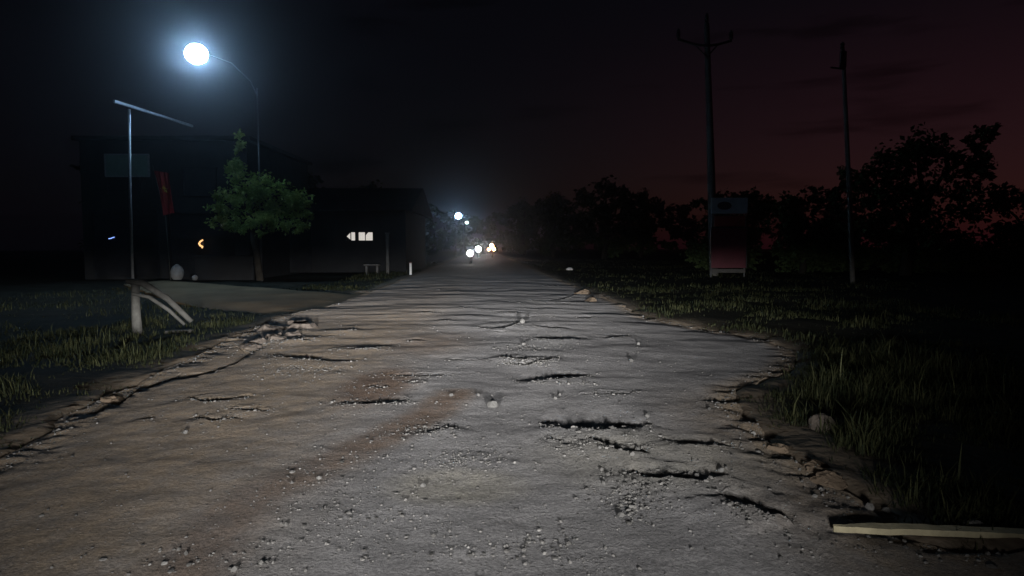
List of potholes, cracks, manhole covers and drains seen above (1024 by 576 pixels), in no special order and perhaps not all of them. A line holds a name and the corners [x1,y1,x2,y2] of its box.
pothole [516,364,593,382]
pothole [505,357,559,365]
pothole [539,401,656,430]
